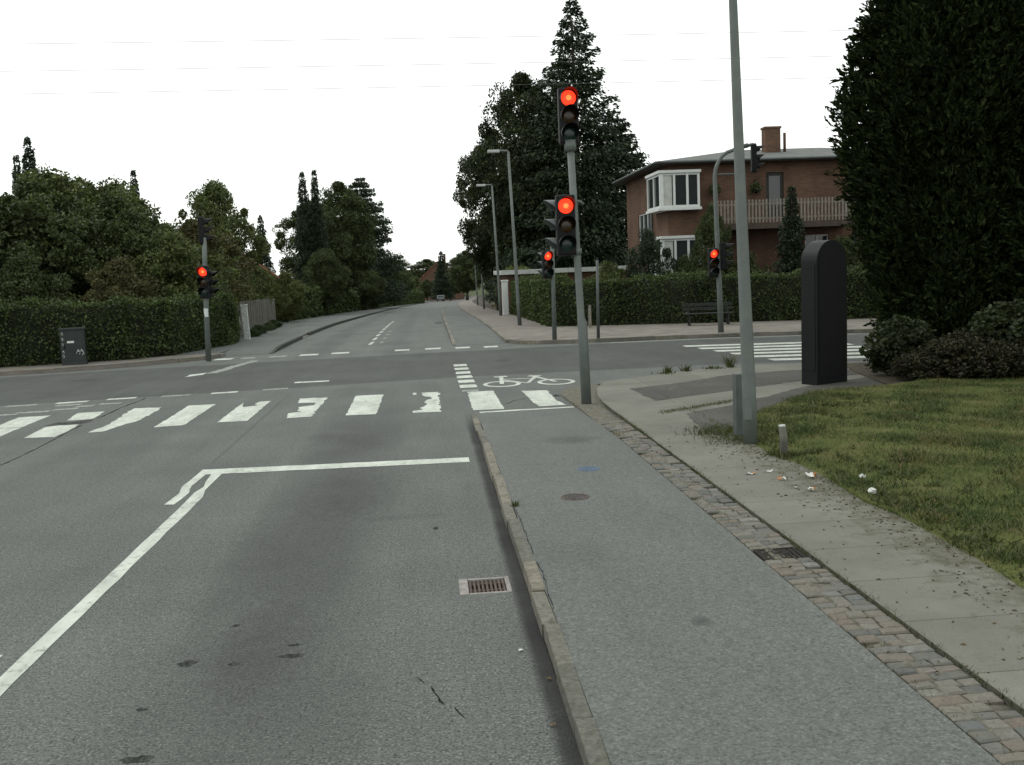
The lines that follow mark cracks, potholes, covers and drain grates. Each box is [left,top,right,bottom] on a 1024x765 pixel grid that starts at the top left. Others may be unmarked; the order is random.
drain grate [458,576,512,595]
drain grate [753,547,807,561]
crack [417,677,465,718]
